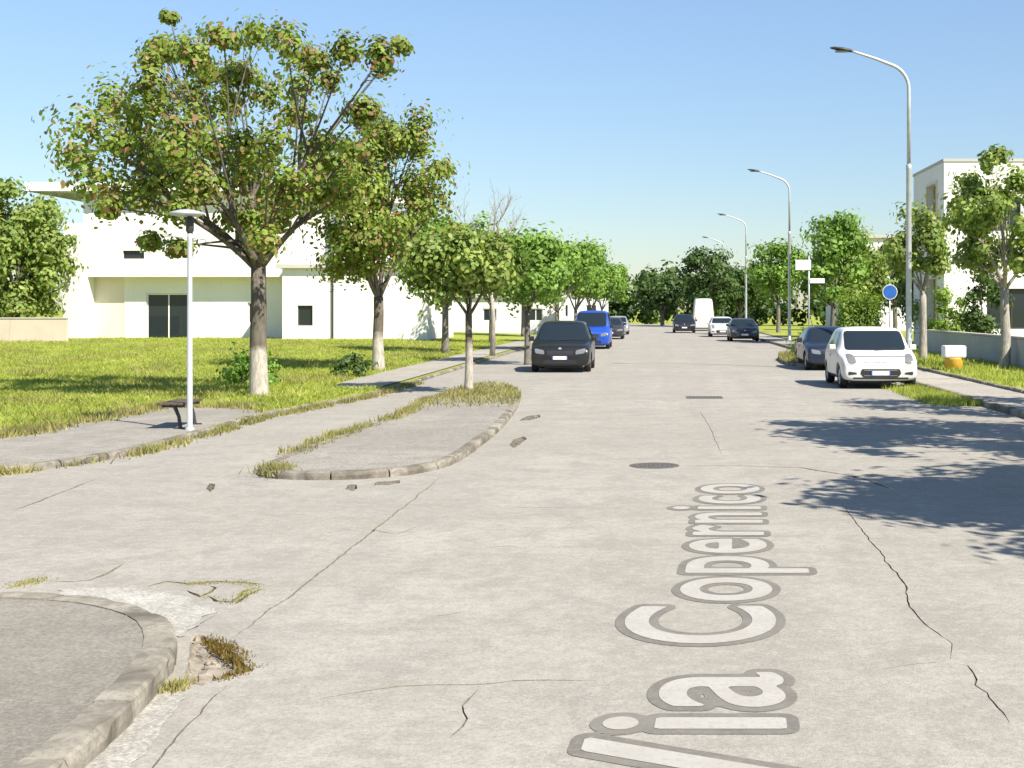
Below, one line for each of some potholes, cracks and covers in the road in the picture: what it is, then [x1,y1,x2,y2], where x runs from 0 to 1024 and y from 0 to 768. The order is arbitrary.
pothole [185,634,252,686]
crack [150,478,439,638]
crack [152,690,222,768]
crack [57,564,123,582]
crack [15,480,93,510]
crack [320,680,587,736]
crack [842,505,1009,722]
